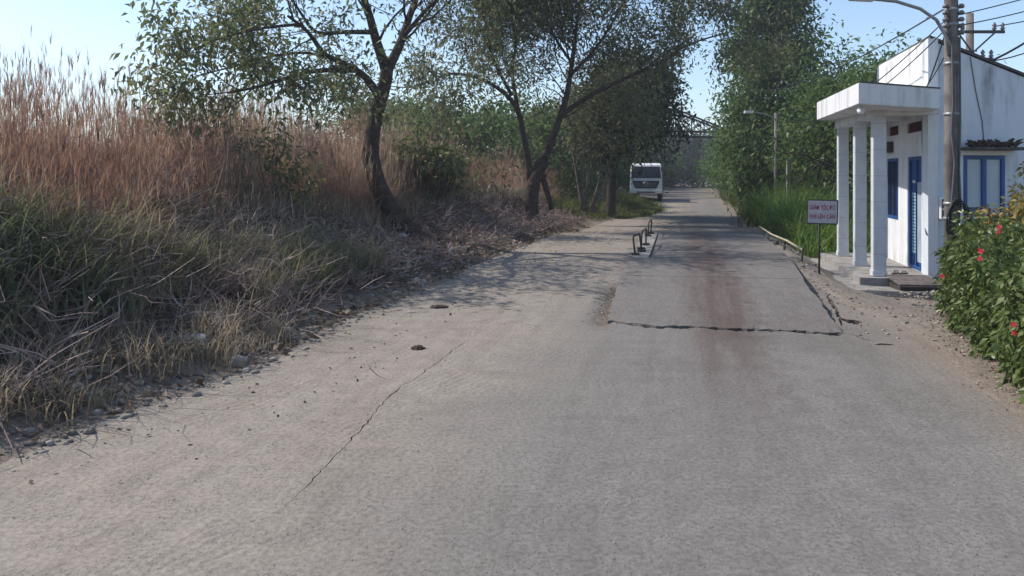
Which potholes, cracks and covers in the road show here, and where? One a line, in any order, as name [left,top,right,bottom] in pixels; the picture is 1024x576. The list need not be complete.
crack [277,340,468,514]
